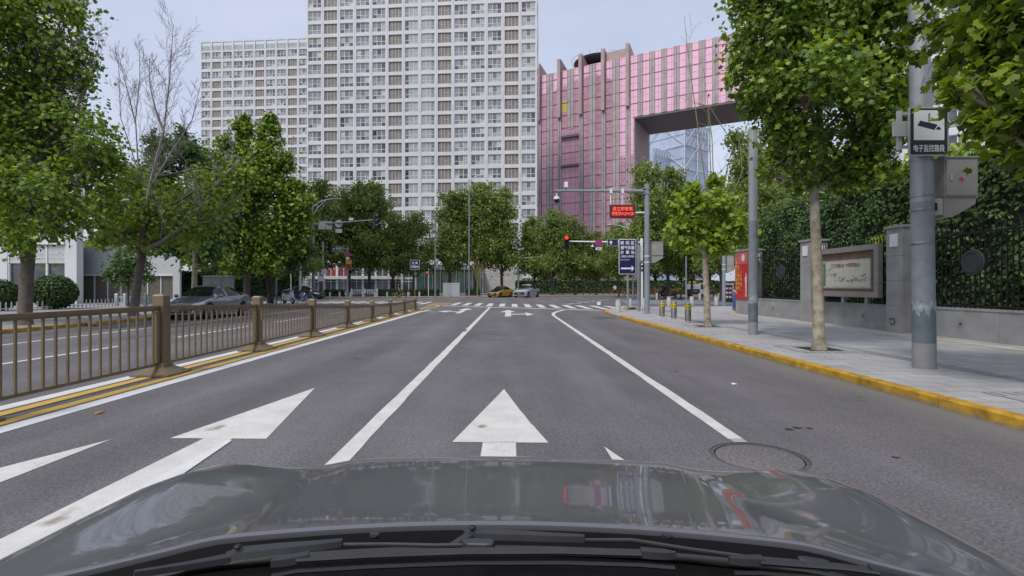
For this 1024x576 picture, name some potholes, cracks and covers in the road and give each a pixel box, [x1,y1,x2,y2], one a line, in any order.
manhole cover [709,443,812,471]
